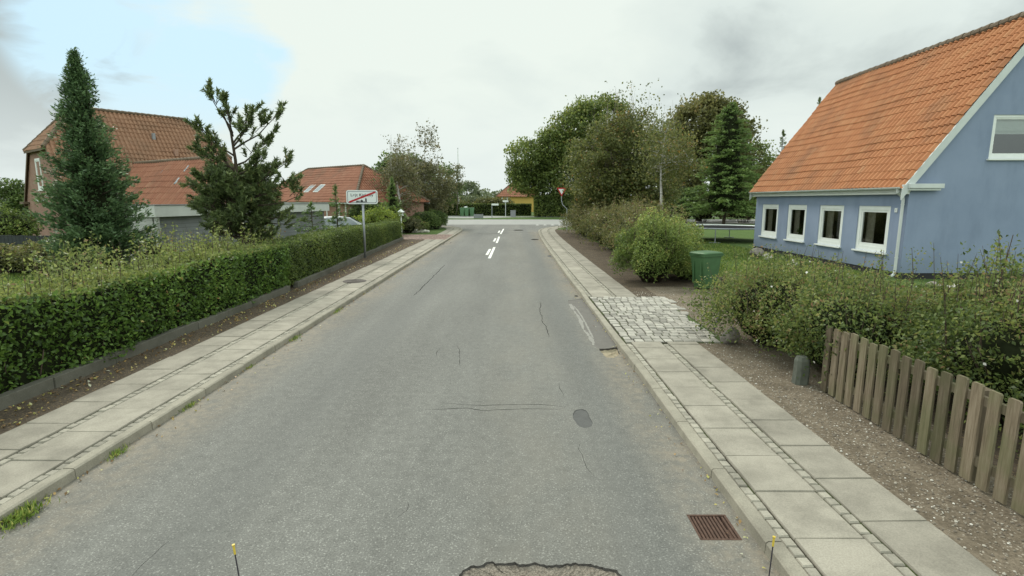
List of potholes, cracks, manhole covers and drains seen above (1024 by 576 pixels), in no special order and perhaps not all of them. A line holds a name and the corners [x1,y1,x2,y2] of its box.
pothole [459,561,622,576]
drain grate [687,514,742,540]
crack [432,386,564,411]
